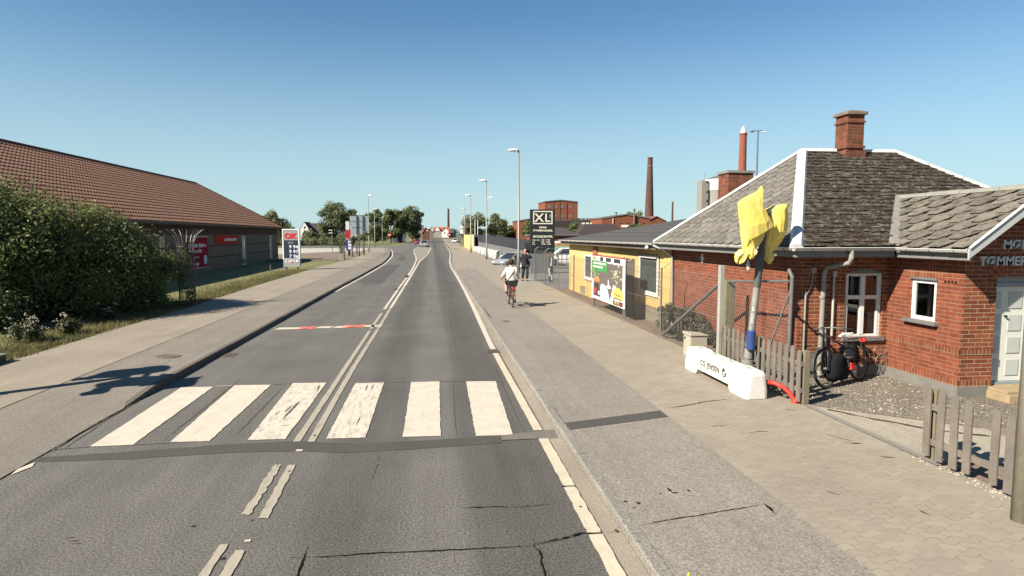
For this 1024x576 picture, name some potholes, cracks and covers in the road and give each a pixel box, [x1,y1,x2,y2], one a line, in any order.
crack [638,503,778,526]
crack [292,532,595,576]
